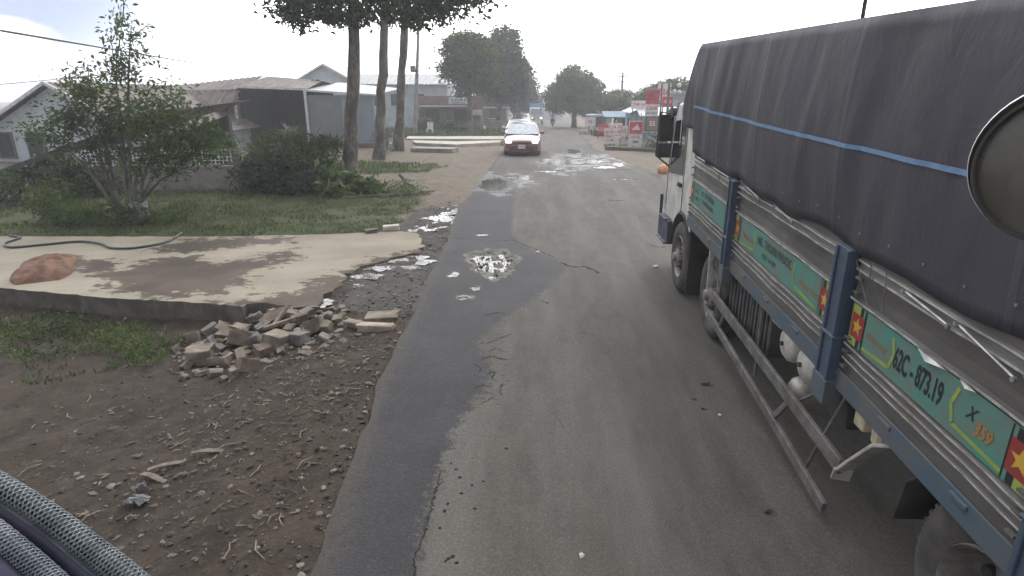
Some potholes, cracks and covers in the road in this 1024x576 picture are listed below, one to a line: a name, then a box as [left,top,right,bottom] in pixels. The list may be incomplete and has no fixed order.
pothole [462,248,523,282]
crack [473,333,511,406]
pothole [473,177,518,192]
